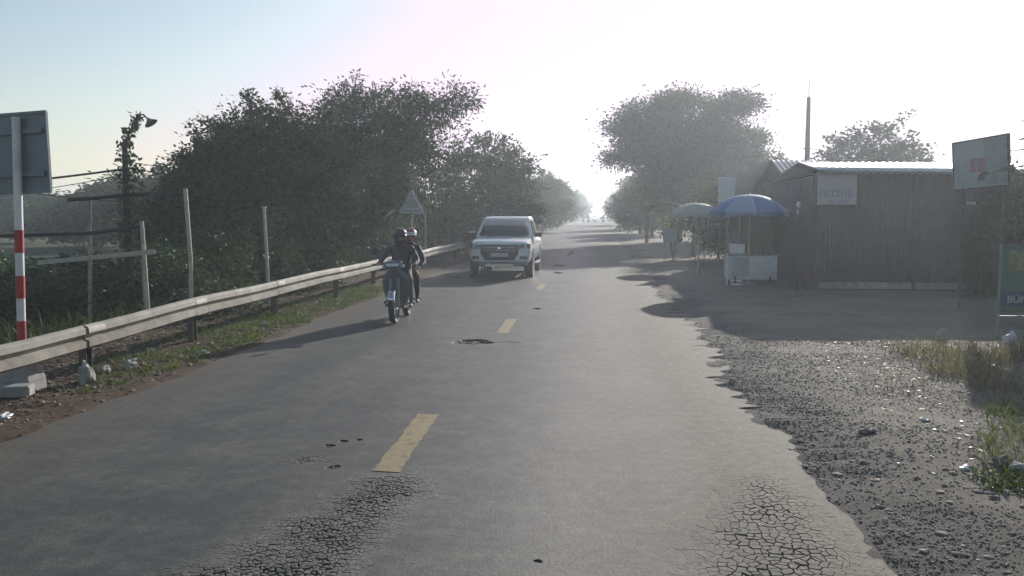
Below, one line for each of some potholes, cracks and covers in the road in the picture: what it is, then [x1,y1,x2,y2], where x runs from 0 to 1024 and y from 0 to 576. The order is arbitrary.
crack [668,470,887,576]
